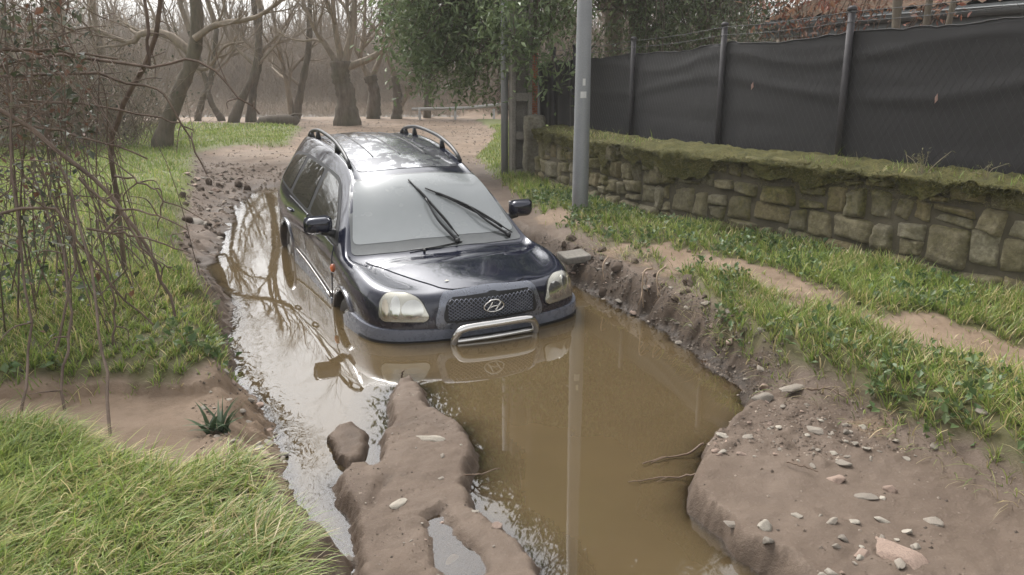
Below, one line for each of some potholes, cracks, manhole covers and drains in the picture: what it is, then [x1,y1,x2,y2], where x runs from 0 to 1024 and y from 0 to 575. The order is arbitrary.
pothole [168,180,818,575]
